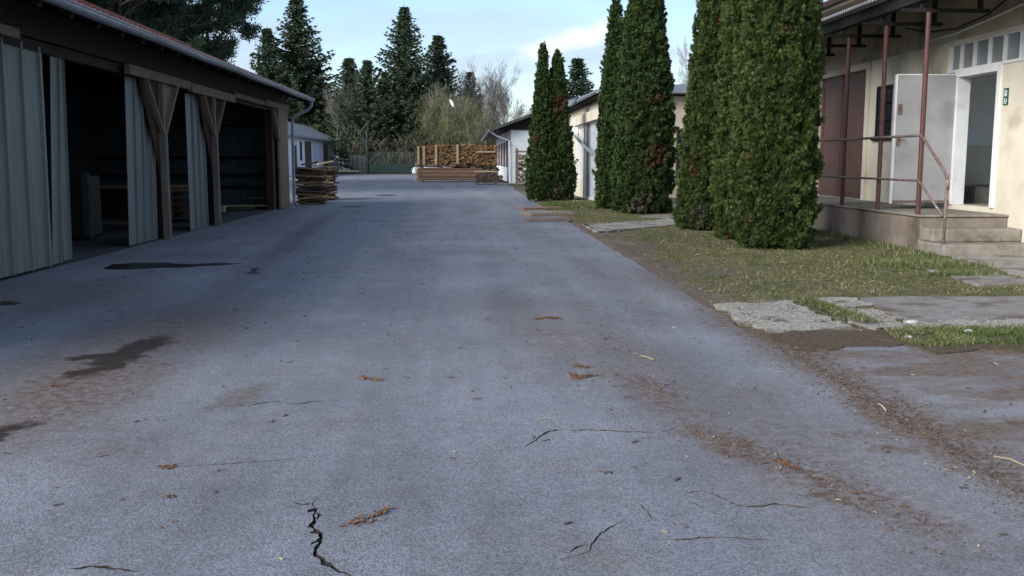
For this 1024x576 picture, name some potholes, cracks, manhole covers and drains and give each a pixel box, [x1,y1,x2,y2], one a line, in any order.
crack [689,491,825,516]
crack [507,428,683,450]
crack [202,400,338,409]
crack [294,499,351,576]
crack [558,521,623,558]
